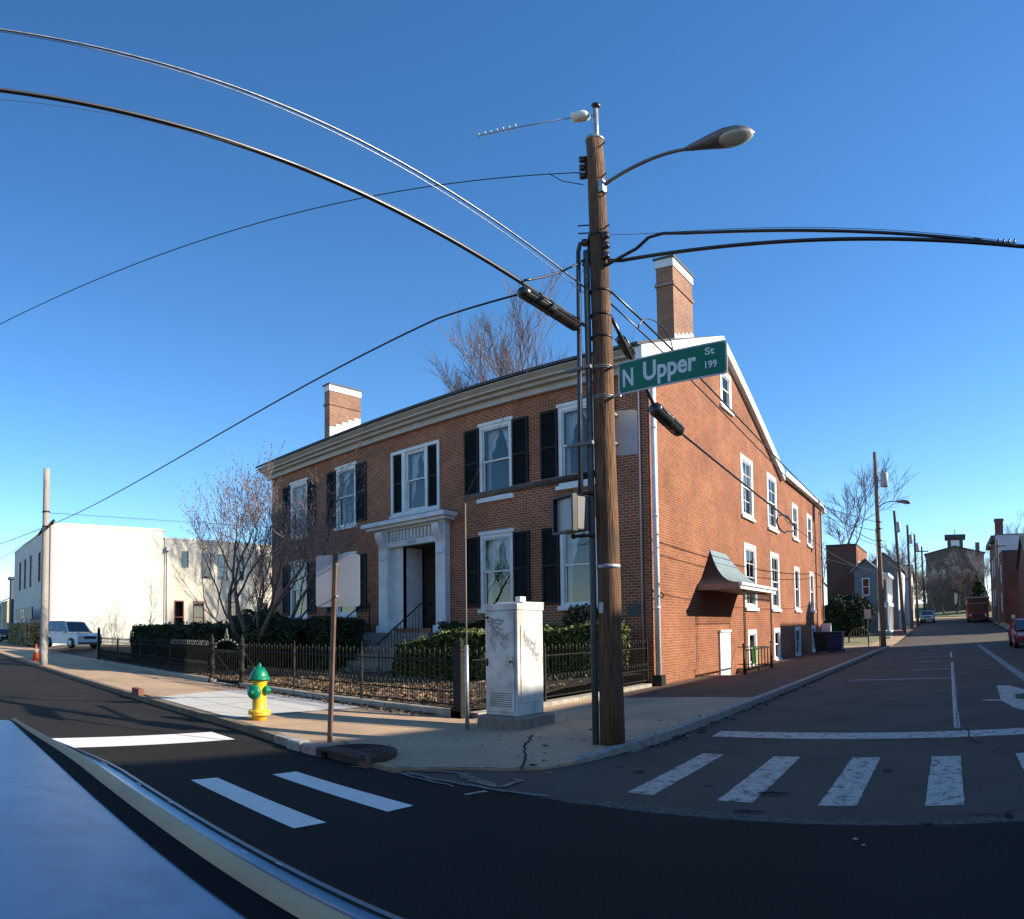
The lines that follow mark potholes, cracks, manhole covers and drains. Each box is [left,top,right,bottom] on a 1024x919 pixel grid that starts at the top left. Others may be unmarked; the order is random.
crack [952,667,1005,752]
crack [514,734,550,770]
